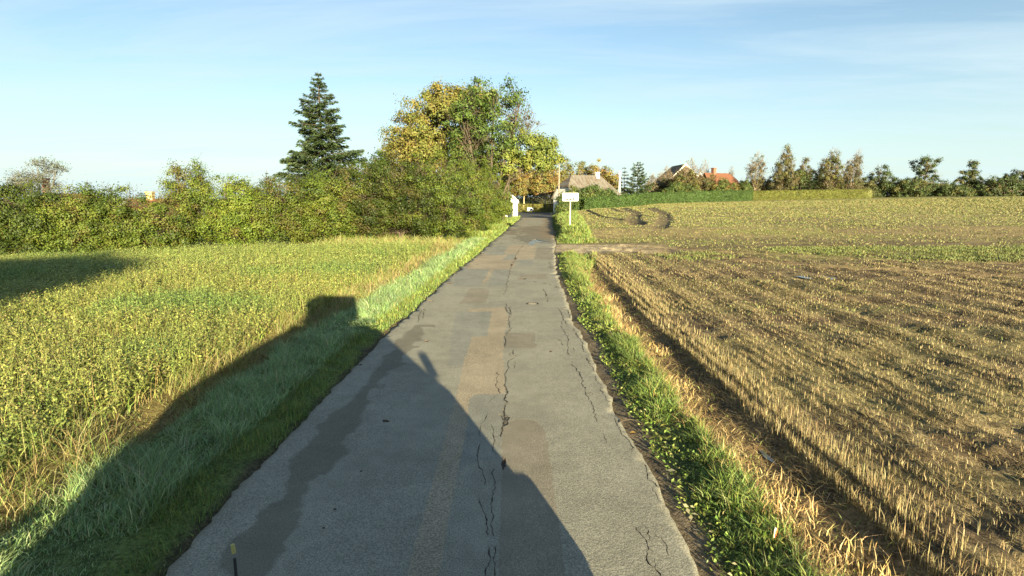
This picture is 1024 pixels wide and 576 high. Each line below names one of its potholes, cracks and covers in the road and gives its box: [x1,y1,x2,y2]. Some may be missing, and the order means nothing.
crack [543,289,660,501]
crack [635,526,668,576]
crack [476,414,504,576]
